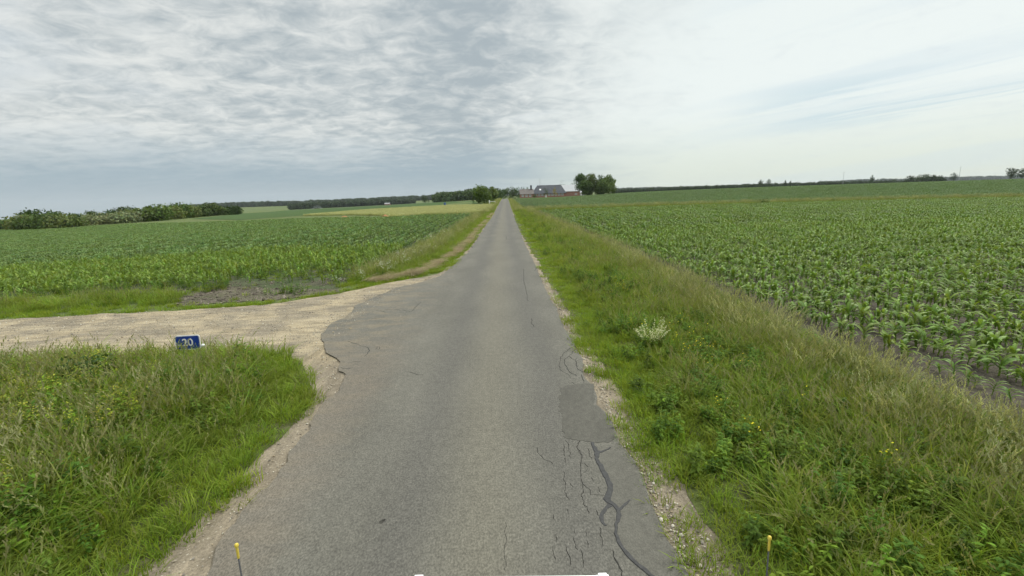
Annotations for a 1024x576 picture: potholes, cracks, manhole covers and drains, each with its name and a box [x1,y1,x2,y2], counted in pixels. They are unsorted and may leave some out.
crack [559,346,584,383]
crack [537,440,623,576]
